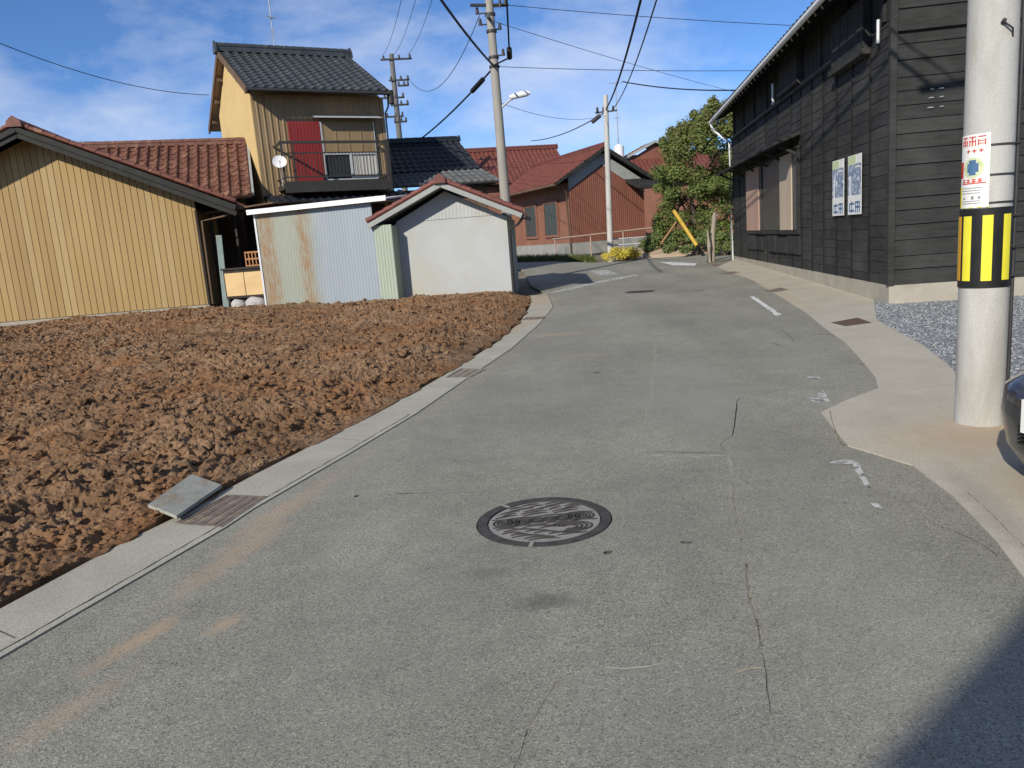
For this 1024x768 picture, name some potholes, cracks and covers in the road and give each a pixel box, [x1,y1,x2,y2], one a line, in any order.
drain grate [445,368,486,378]
drain grate [831,318,872,326]
crack [928,522,997,556]
crack [639,327,799,714]
manhole cover [477,497,611,547]
drain grate [175,494,268,527]
